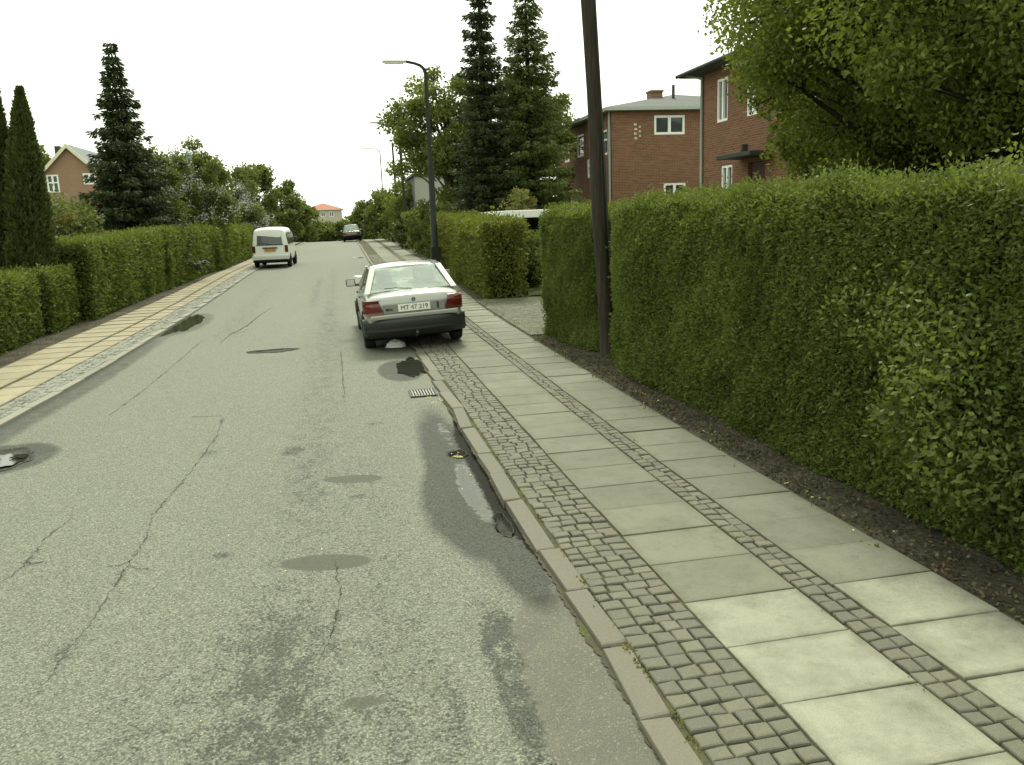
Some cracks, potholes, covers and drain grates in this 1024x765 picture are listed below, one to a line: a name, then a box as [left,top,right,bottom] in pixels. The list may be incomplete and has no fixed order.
crack [319,565,342,659]
pothole [495,511,514,538]
crack [40,416,223,687]
pothole [0,447,33,471]
drain grate [408,388,438,397]
pothole [448,449,468,459]
